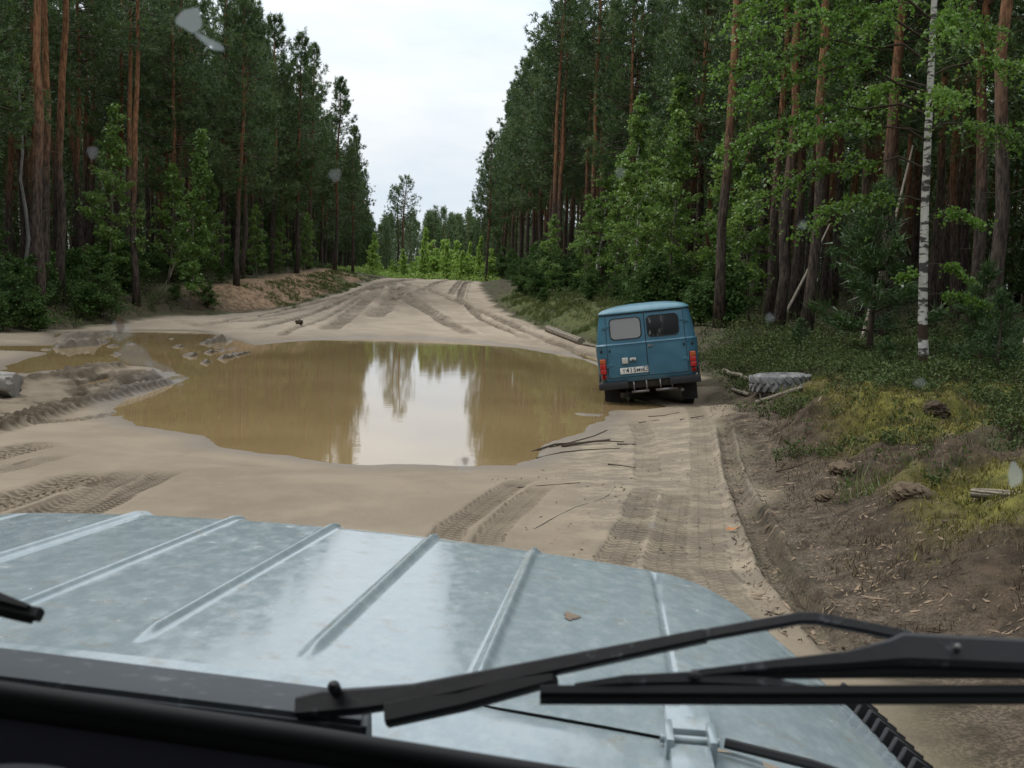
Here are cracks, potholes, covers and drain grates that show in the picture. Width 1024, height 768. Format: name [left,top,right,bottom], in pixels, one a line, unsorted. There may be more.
pothole [0,330,665,466]
